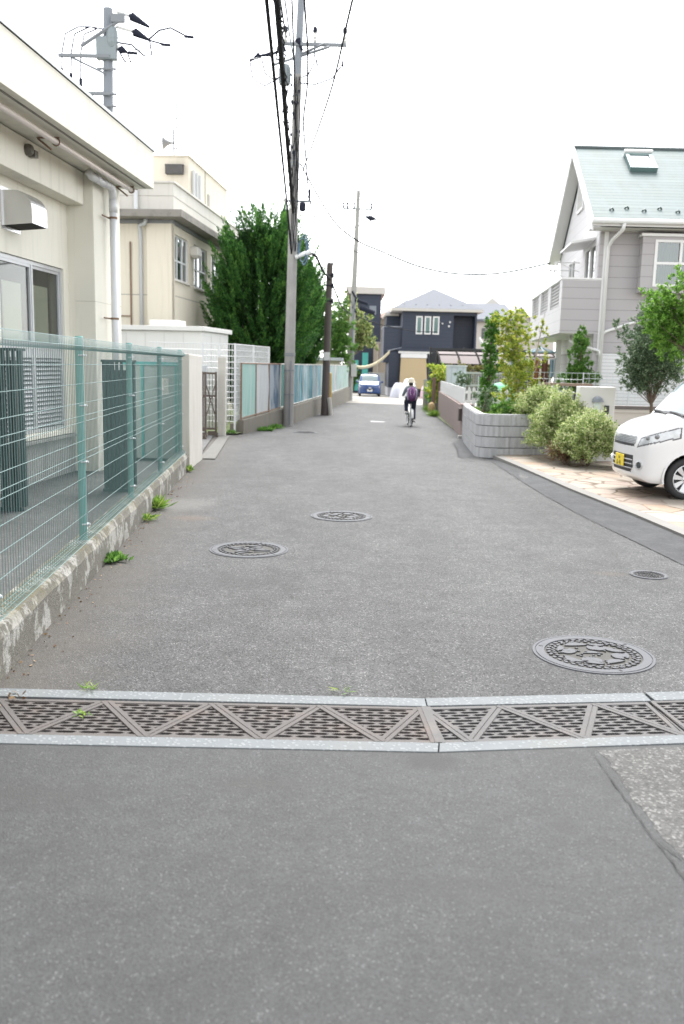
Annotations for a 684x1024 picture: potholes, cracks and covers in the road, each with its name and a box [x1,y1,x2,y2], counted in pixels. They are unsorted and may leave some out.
manhole cover [310,511,373,522]
manhole cover [532,635,656,675]
manhole cover [209,541,288,558]
manhole cover [629,570,669,580]
